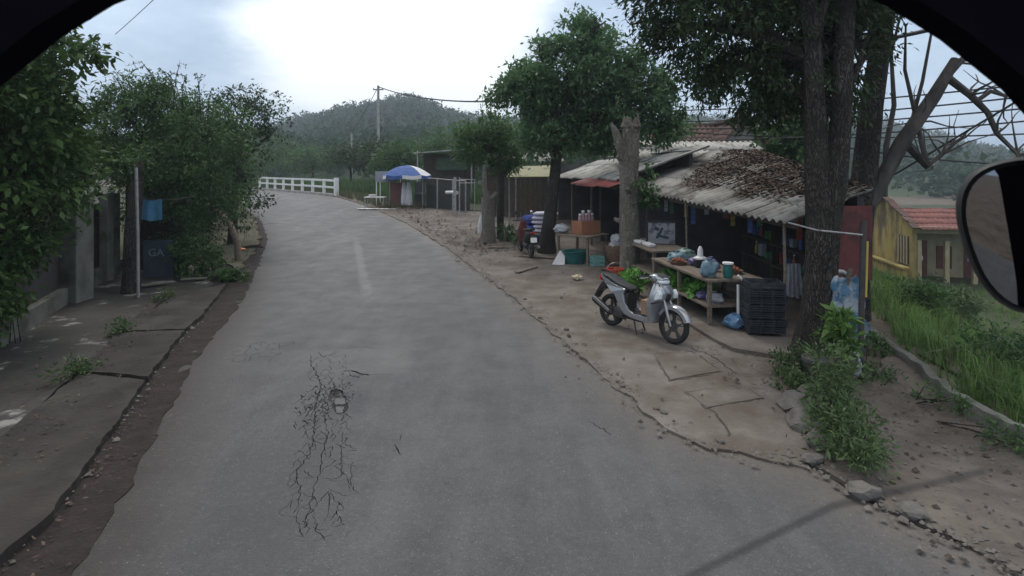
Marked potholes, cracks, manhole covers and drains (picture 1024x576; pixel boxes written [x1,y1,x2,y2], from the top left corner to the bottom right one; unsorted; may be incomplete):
crack [279,347,395,541]
pothole [330,388,349,414]
